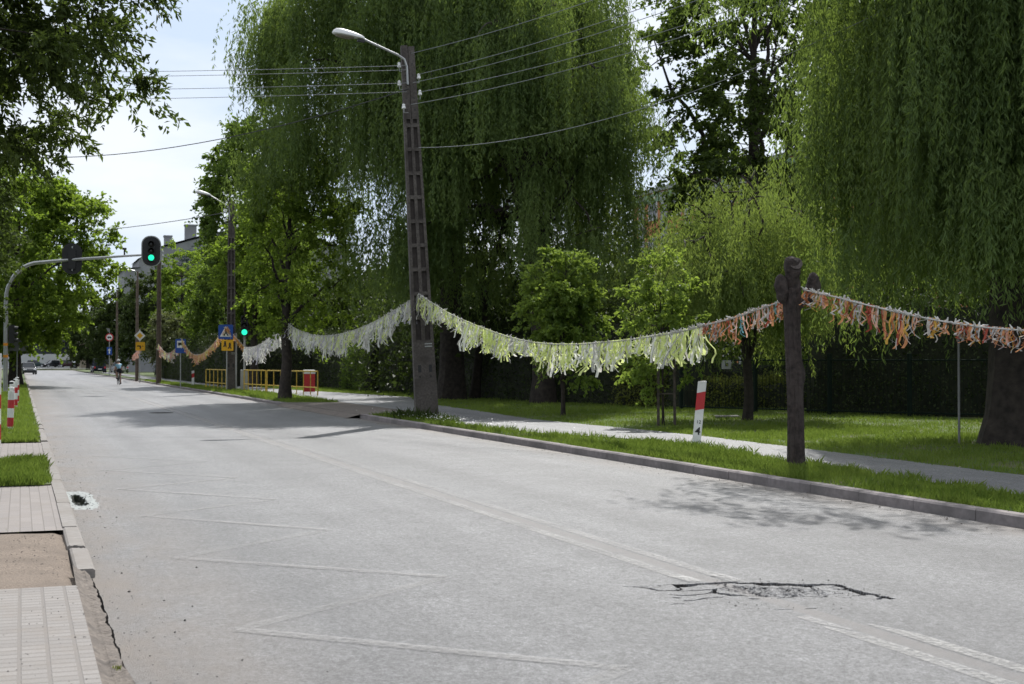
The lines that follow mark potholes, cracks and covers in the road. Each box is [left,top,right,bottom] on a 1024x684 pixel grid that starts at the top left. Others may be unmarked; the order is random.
crack [85,571,160,684]
pothole [66,489,111,512]
